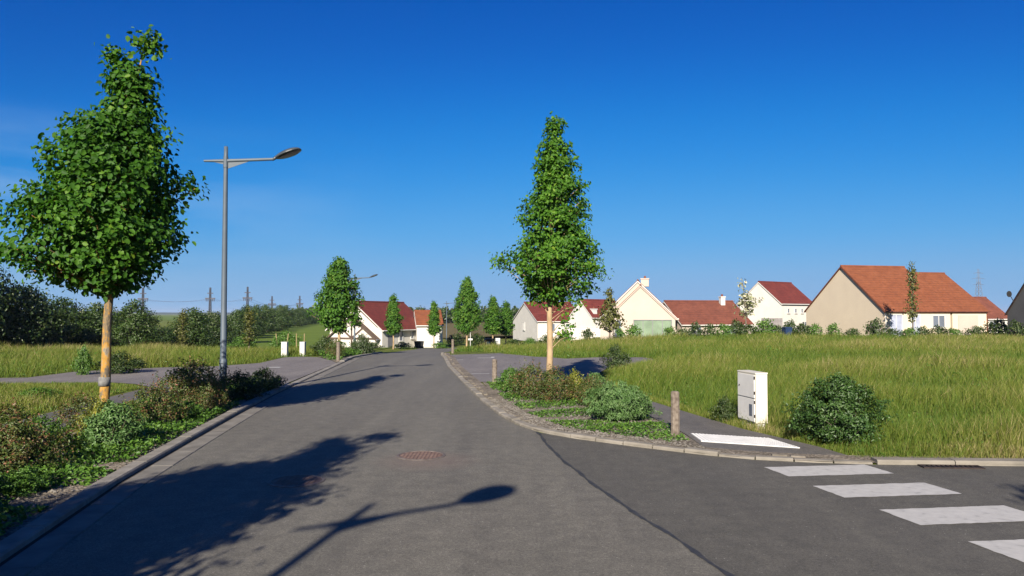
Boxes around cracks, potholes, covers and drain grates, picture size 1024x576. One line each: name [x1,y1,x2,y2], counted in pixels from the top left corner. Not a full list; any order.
manhole cover [396,451,446,460]
manhole cover [267,475,325,487]
